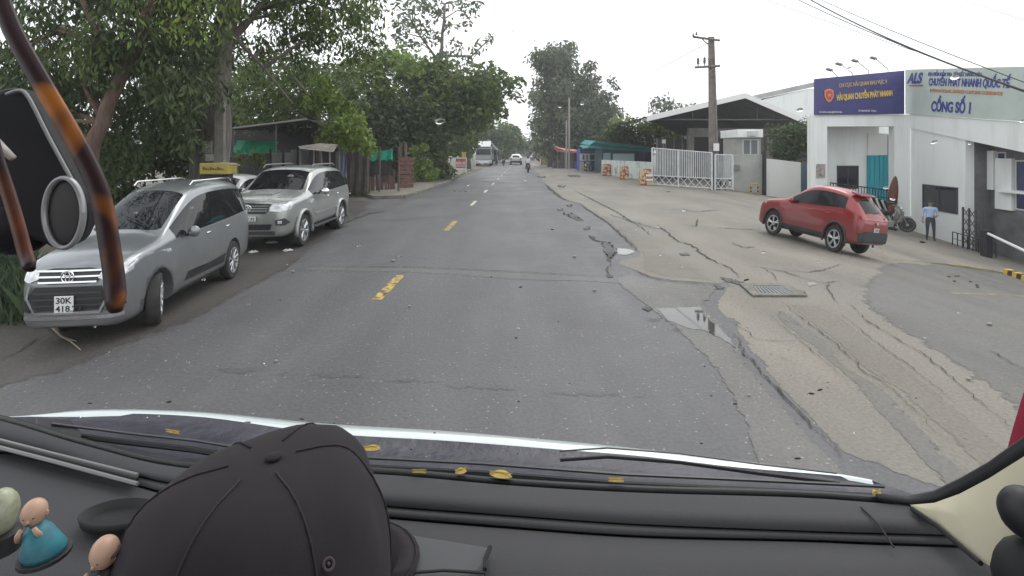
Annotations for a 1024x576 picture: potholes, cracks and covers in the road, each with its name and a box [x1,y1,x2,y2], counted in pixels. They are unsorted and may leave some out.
crack [546,185,758,276]
crack [725,318,883,458]
